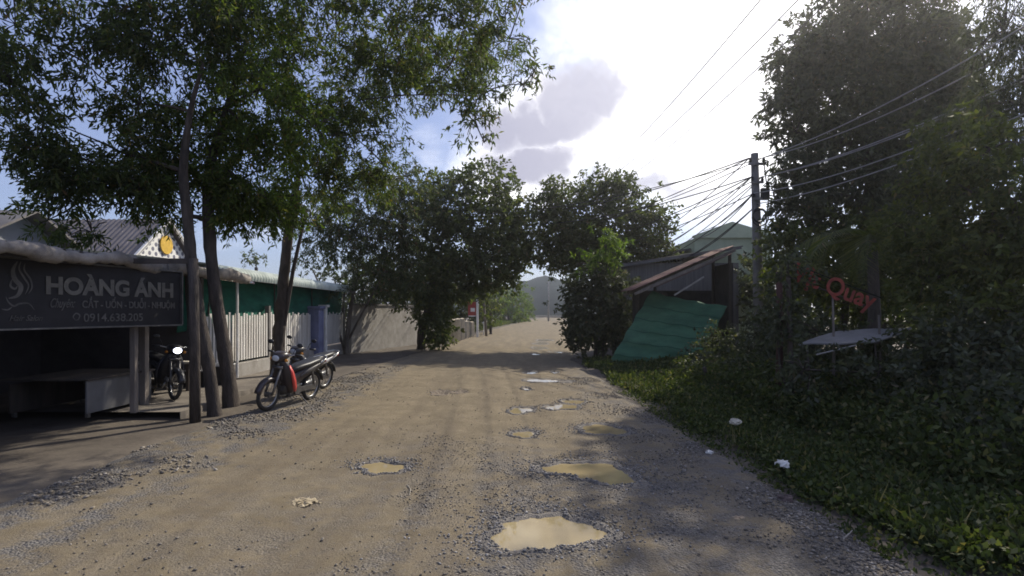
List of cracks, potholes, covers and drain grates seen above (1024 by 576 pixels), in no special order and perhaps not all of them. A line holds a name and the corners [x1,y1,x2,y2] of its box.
pothole [552,397,595,405]
pothole [498,423,550,439]
pothole [559,414,658,437]
pothole [340,454,429,477]
pothole [501,401,542,415]
pothole [534,401,590,411]
